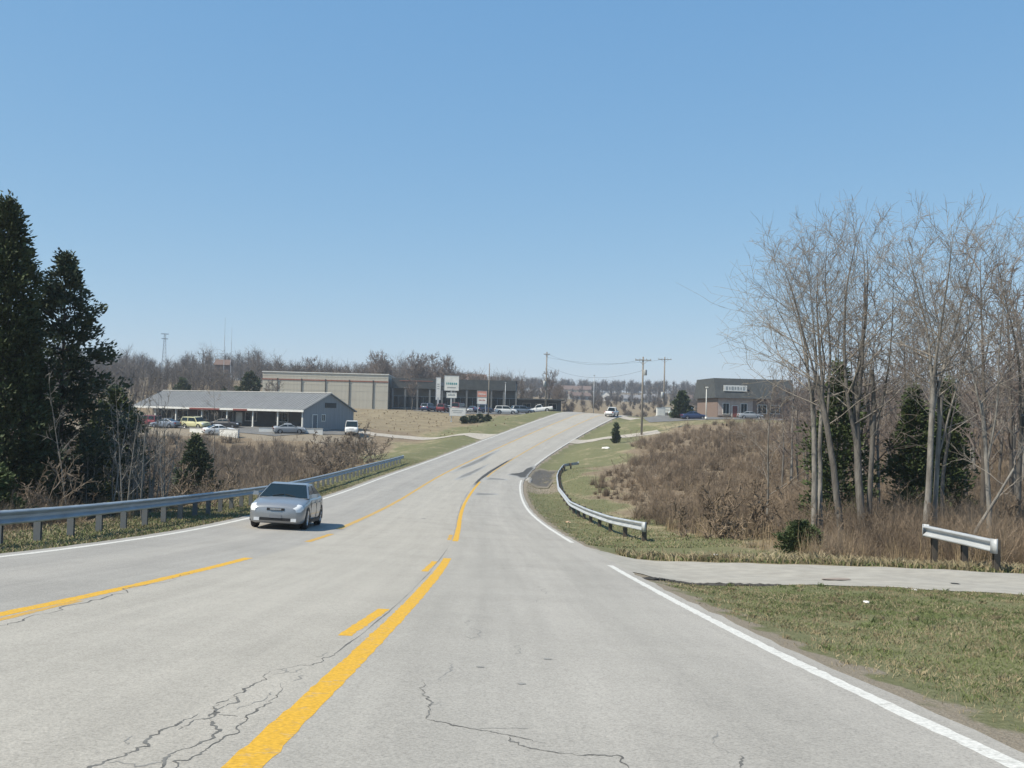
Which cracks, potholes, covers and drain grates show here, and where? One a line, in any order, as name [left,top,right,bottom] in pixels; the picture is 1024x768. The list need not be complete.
crack [712,733,744,768]
crack [420,662,629,768]
crack [87,653,334,768]
